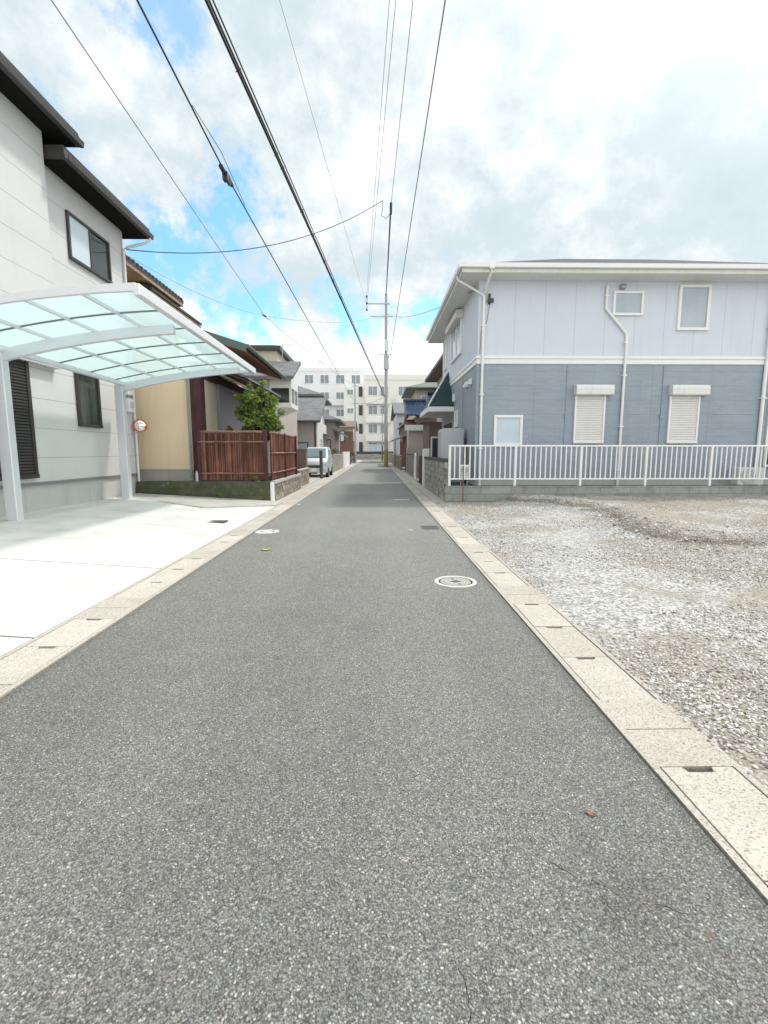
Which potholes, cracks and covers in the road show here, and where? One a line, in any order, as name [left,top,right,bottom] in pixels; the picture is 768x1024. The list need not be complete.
crack [454,958,502,1024]
crack [546,860,694,922]
manhole cover [434,576,477,587]
